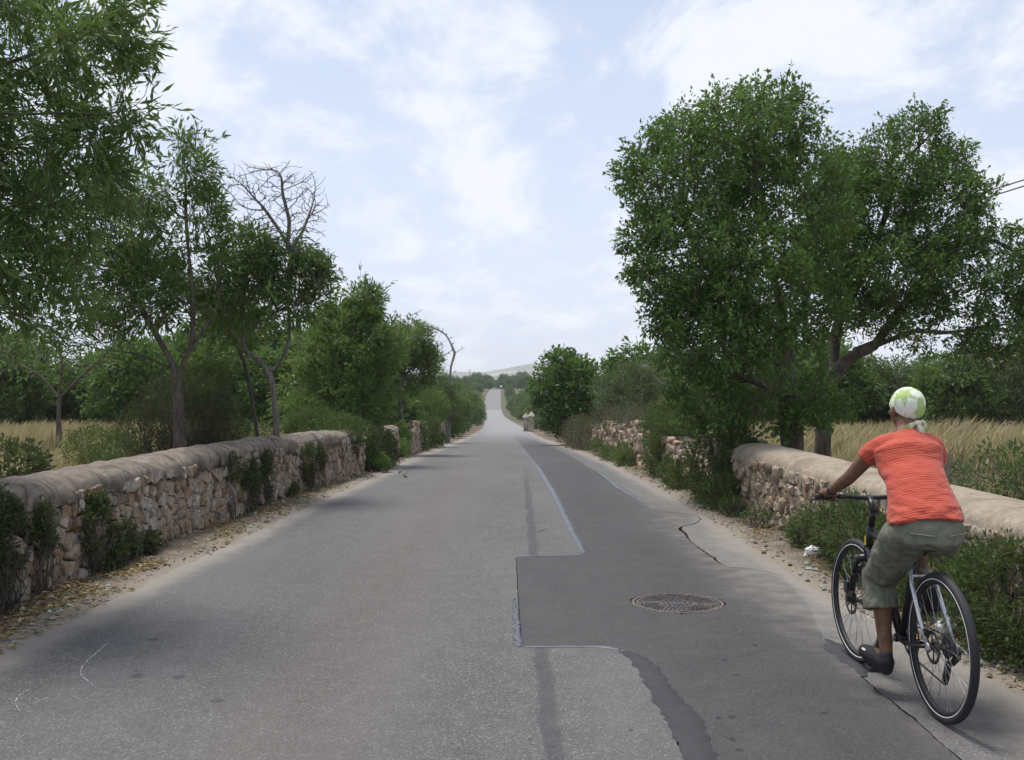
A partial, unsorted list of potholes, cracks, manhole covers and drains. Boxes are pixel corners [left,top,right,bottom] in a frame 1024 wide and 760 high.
manhole cover [631,593,726,614]
crack [655,509,779,575]
